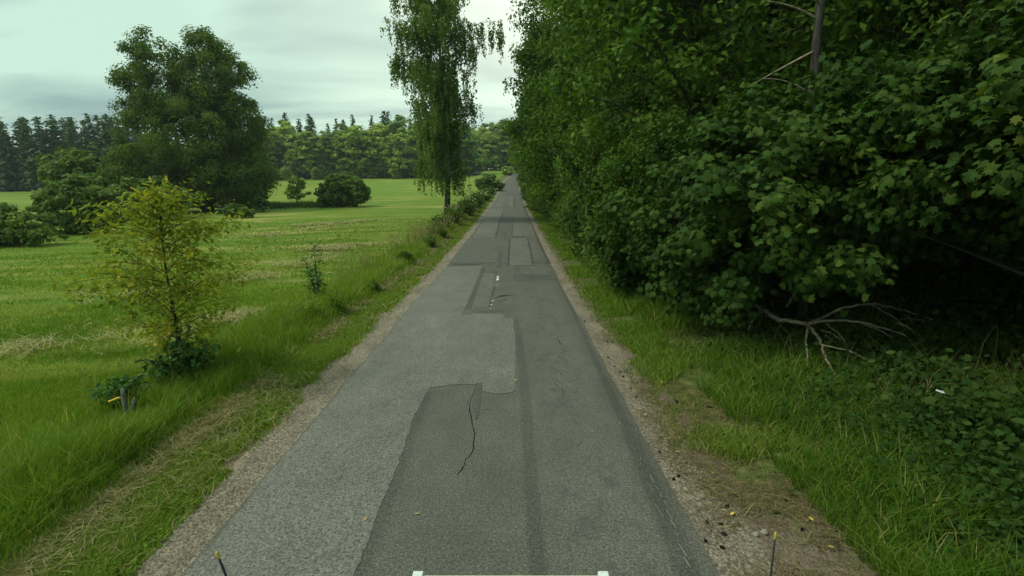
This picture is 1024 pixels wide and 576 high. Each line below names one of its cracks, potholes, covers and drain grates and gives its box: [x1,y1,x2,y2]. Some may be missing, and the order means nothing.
crack [457,385,494,475]
